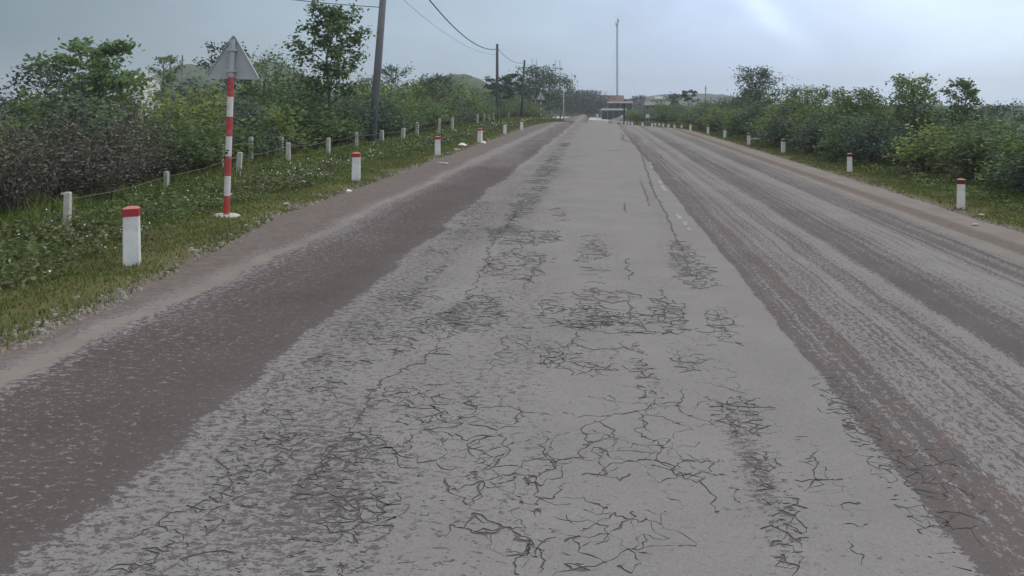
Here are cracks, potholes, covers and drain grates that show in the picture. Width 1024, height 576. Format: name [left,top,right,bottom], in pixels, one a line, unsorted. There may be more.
crack [106,134,869,576]
crack [808,377,986,572]
